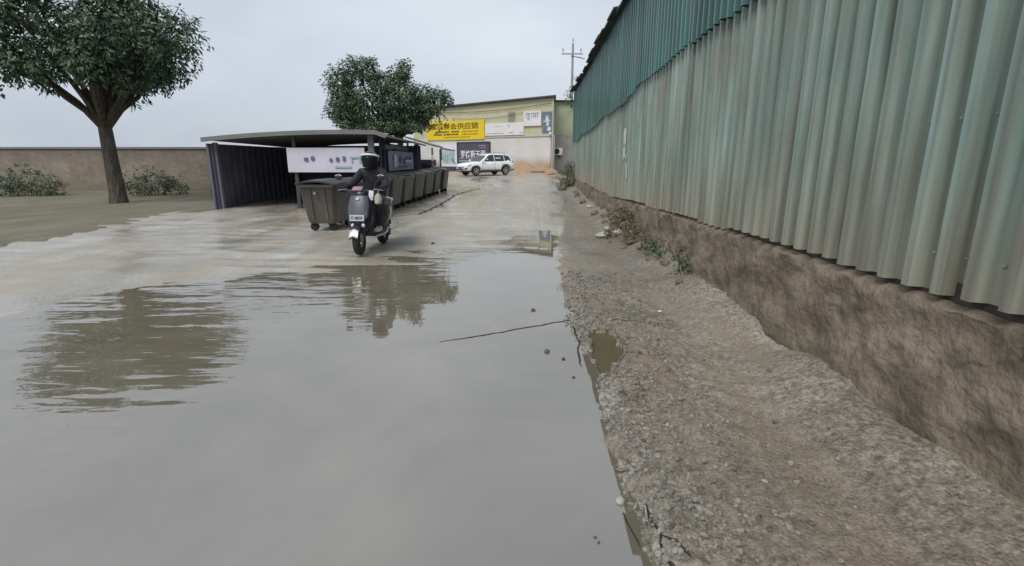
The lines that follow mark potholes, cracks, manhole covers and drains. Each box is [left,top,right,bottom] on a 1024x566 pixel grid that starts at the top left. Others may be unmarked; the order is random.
crack [441,316,668,367]
crack [623,503,692,566]
pothole [588,328,628,374]
crack [401,188,480,216]
